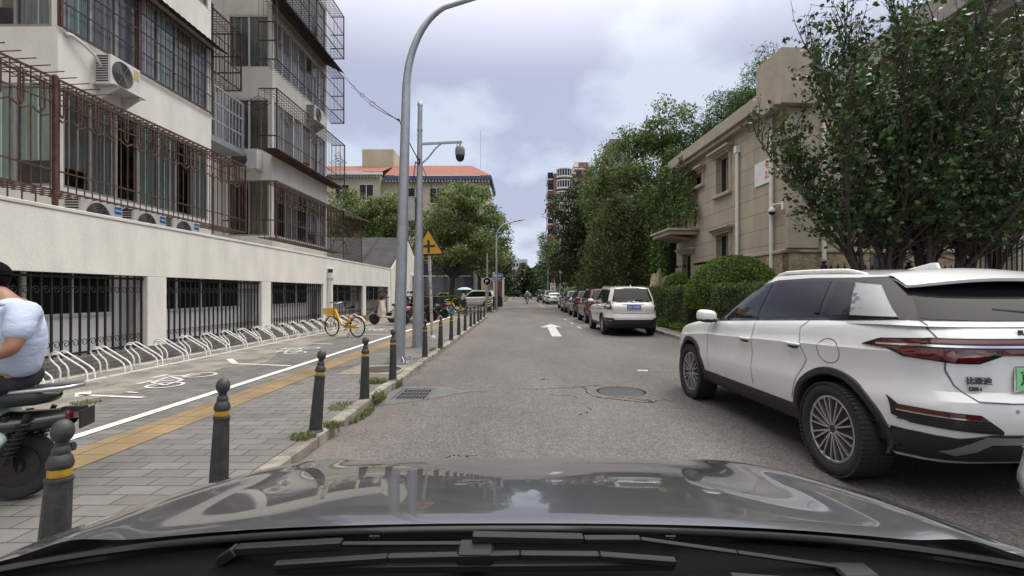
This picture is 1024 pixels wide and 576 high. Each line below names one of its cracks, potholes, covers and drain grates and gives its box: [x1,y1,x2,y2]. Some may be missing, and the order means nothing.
drain grate [391,389,435,400]
crack [518,385,672,415]
manhole cover [597,387,646,400]
